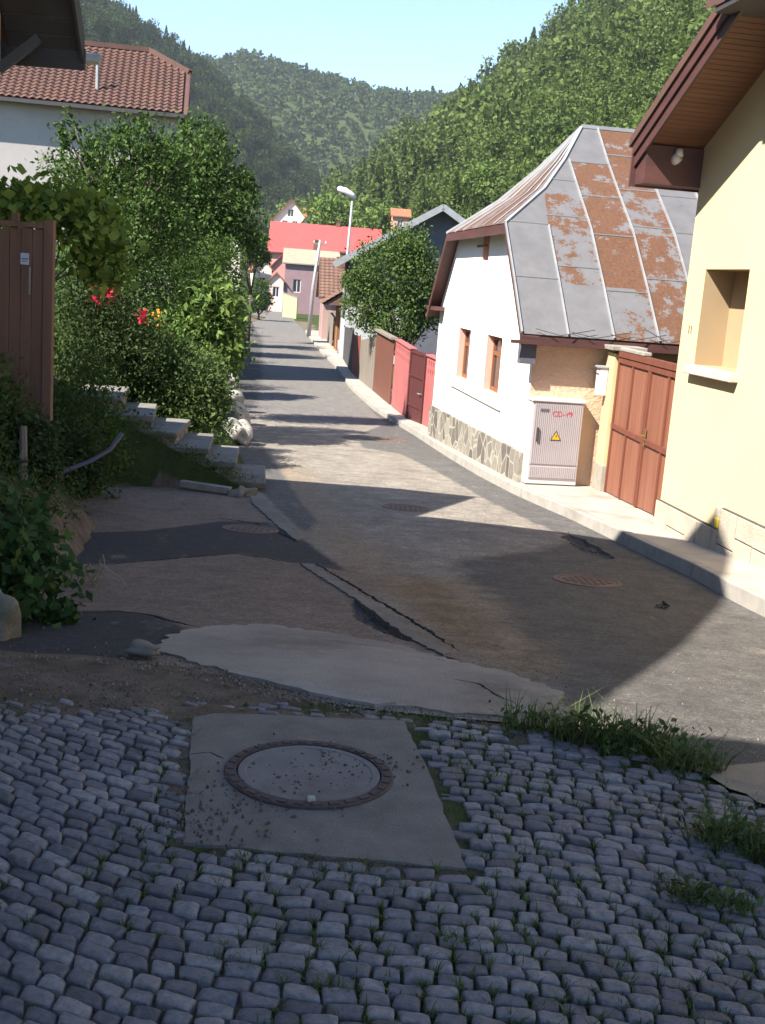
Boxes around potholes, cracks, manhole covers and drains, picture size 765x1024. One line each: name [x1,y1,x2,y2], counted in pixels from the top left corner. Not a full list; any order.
manhole cover [552,574,623,588]
pothole [560,532,615,560]
crack [456,679,514,703]
manhole cover [222,524,279,534]
manhole cover [224,740,394,810]
crack [316,563,458,650]
